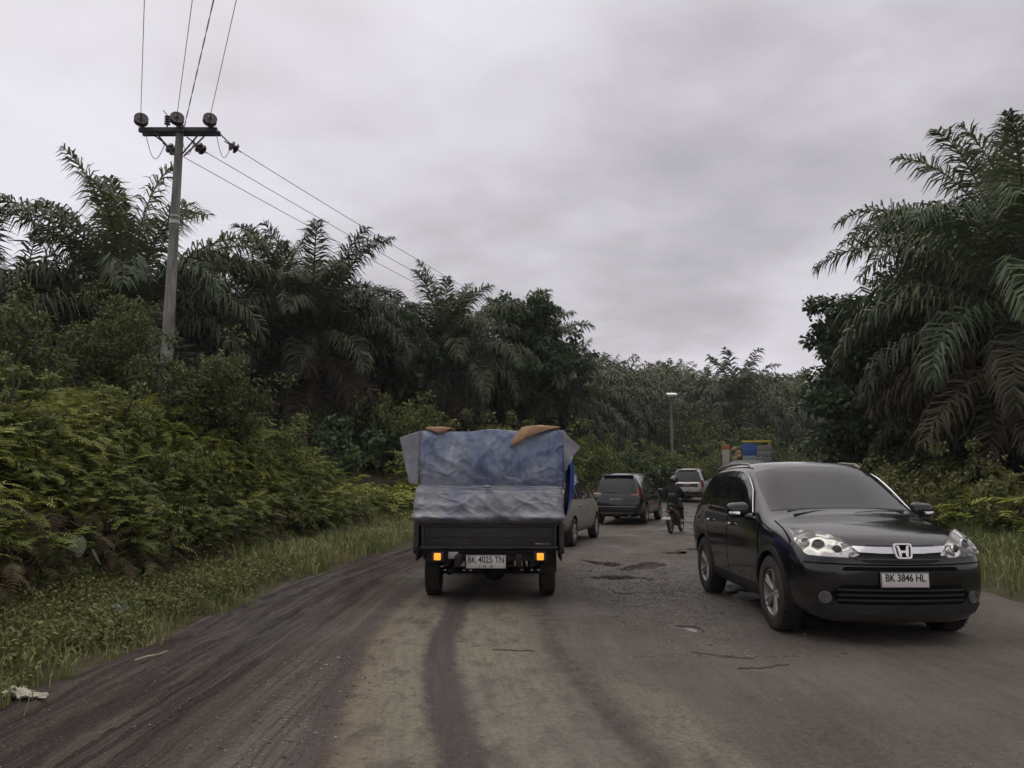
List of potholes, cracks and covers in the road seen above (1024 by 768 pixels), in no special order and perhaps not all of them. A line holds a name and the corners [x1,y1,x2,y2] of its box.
pothole [571,574,661,582]
crack [690,651,790,669]
pothole [613,561,671,572]
pothole [574,559,627,569]
pothole [667,624,711,634]
